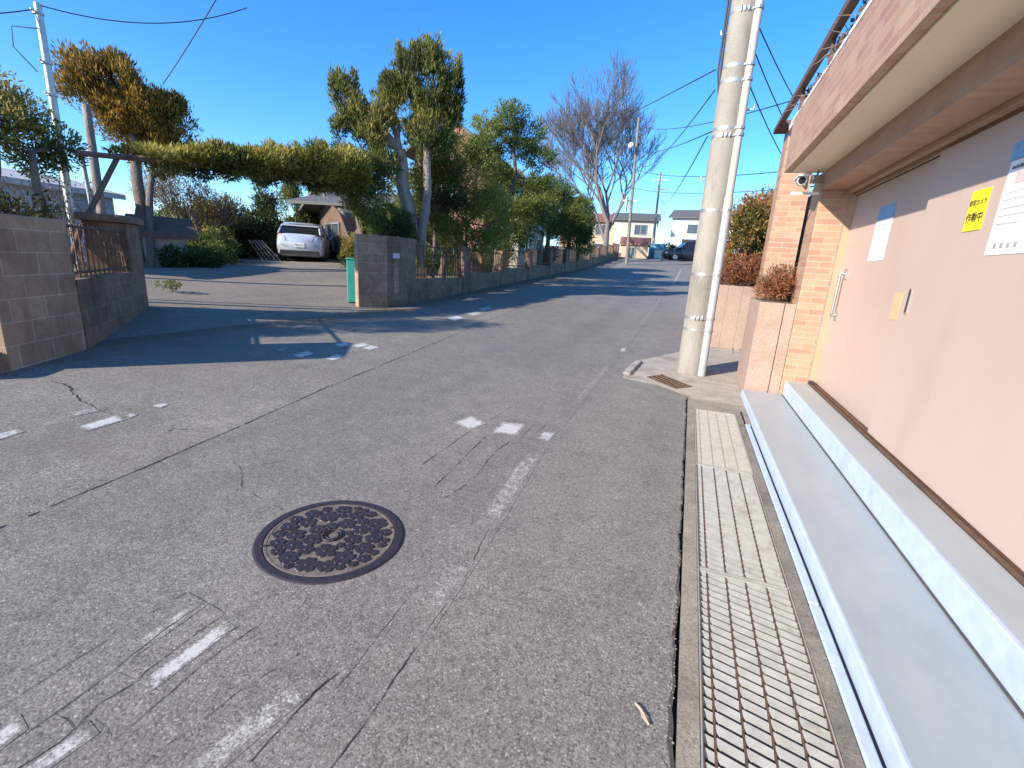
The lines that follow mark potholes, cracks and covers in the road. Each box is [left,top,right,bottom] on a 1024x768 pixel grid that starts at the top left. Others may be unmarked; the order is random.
crack [0,592,261,768]
drain grate [697,568,845,768]
crack [144,528,490,768]
drain grate [694,408,753,474]
crack [51,381,111,414]
manhole cover [252,500,404,585]
drain grate [647,374,692,389]
drain grate [695,463,789,591]
